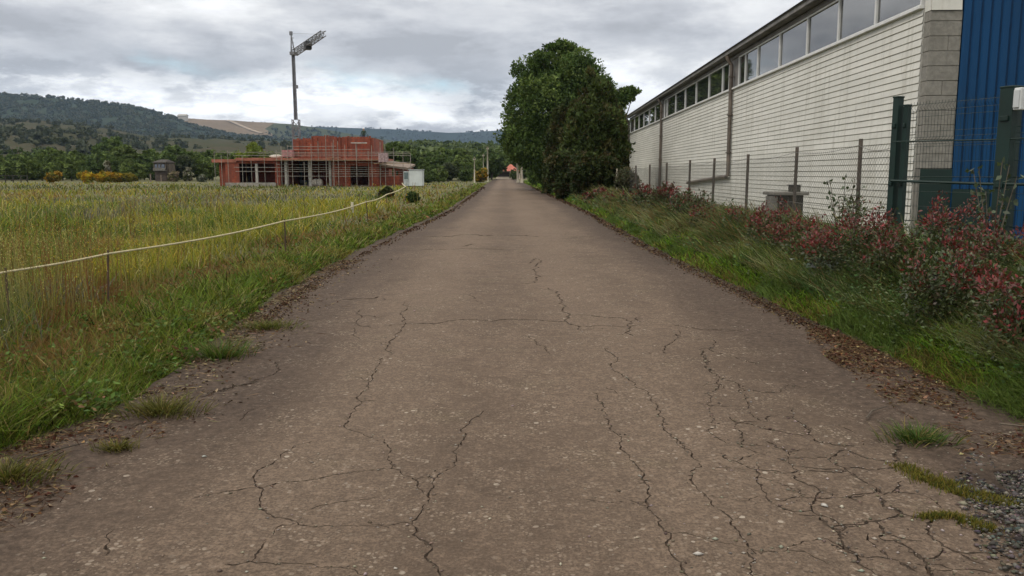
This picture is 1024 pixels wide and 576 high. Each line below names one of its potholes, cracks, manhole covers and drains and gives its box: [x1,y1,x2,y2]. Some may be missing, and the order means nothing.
crack [604,339,998,576]
crack [195,259,638,576]
